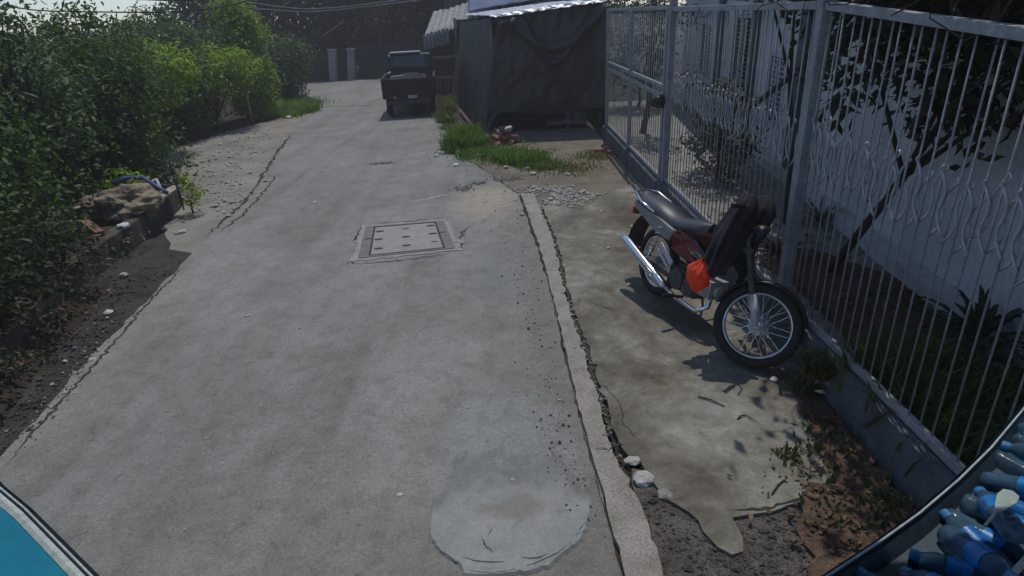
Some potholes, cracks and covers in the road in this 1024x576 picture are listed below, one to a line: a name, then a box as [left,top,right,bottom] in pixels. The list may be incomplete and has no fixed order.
crack [604,386,633,450]
manhole cover [350,219,462,262]
crack [5,268,183,465]
crack [221,175,277,231]
